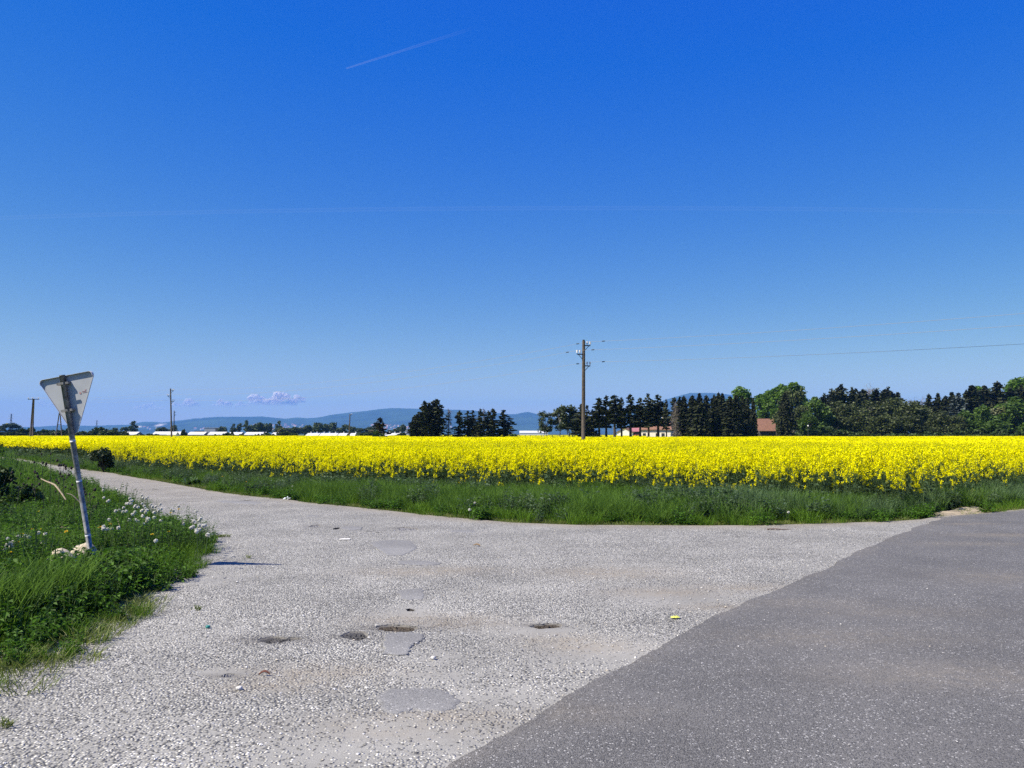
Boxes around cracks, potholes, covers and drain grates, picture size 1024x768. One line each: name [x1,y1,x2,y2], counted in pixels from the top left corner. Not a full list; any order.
pothole [376,624,418,632]
pothole [257,636,302,644]
pothole [341,631,369,641]
